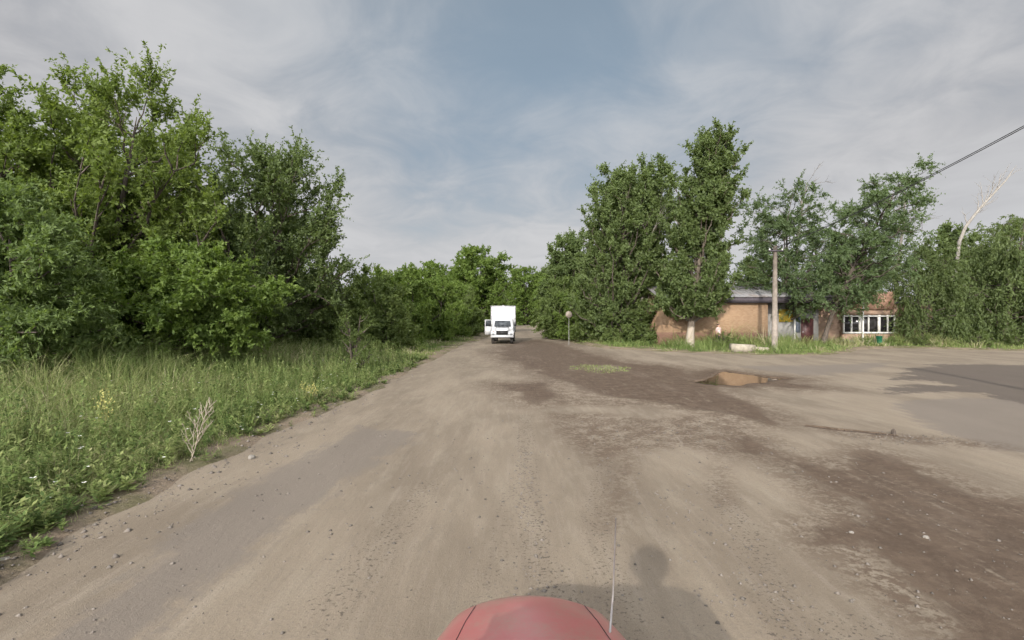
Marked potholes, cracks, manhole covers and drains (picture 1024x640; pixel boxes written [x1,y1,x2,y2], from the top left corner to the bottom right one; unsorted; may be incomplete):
pothole [686,370,795,387]
crack [805,425,899,437]
